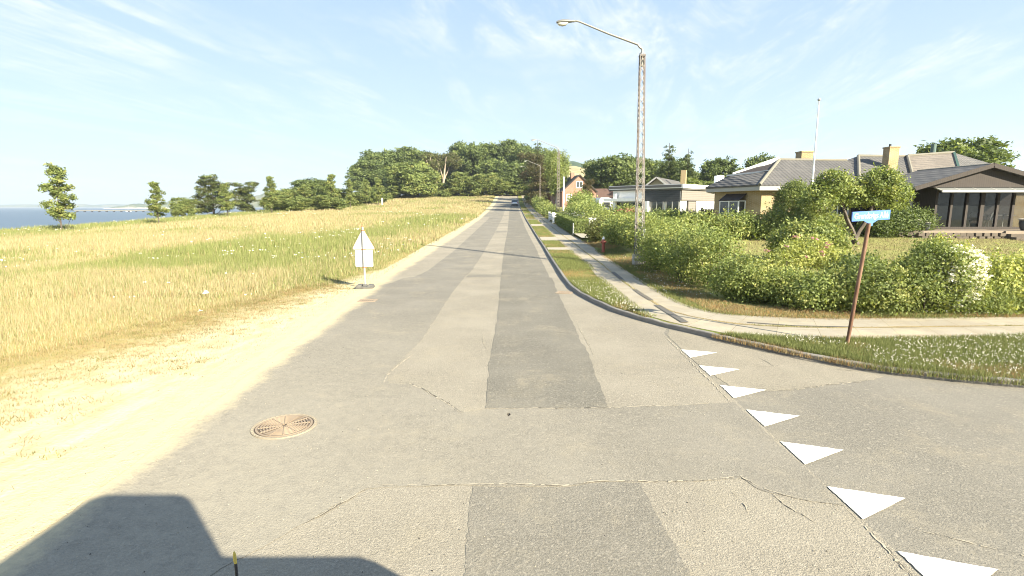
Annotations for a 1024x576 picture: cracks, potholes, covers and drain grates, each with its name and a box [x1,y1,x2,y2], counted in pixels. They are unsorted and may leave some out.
crack [306,488,367,523]
manhole cover [250,414,317,439]
